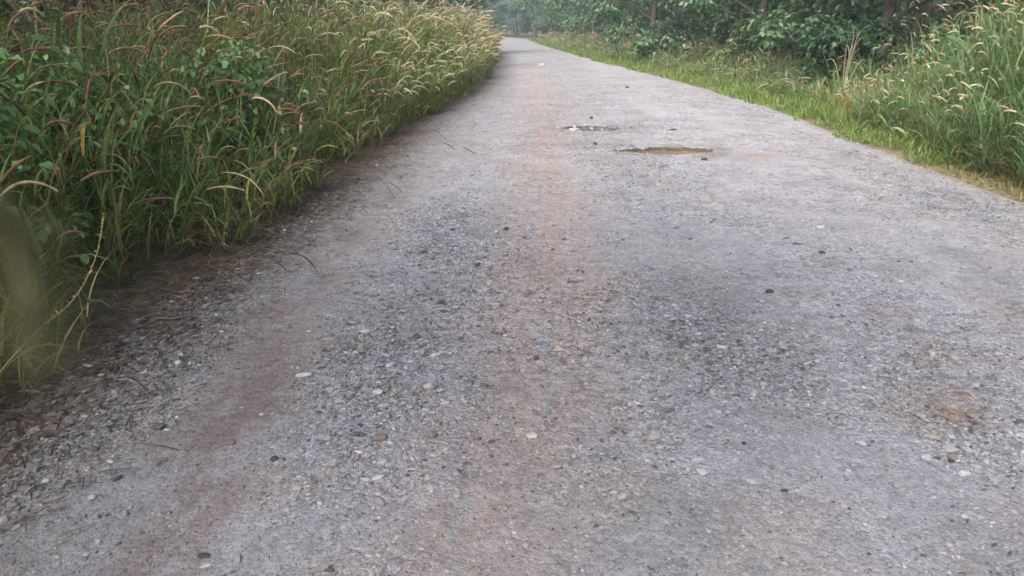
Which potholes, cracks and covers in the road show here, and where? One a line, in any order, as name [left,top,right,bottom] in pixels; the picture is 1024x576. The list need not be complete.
pothole [591,146,723,157]
pothole [555,124,626,133]
